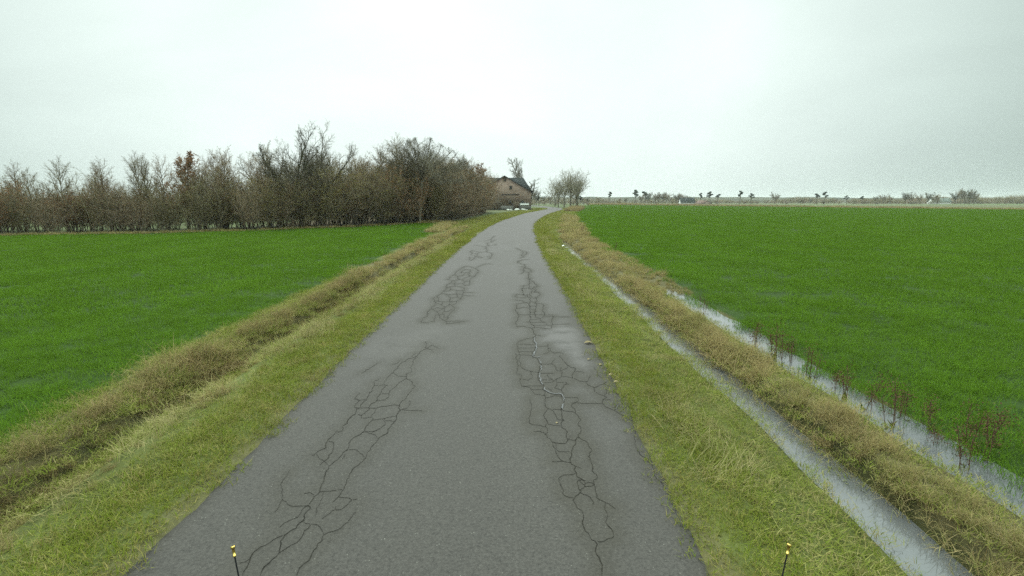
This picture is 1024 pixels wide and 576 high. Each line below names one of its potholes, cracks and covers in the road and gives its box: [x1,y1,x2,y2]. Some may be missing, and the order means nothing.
crack [422,244,493,324]
crack [241,346,437,575]
crack [515,251,662,566]
